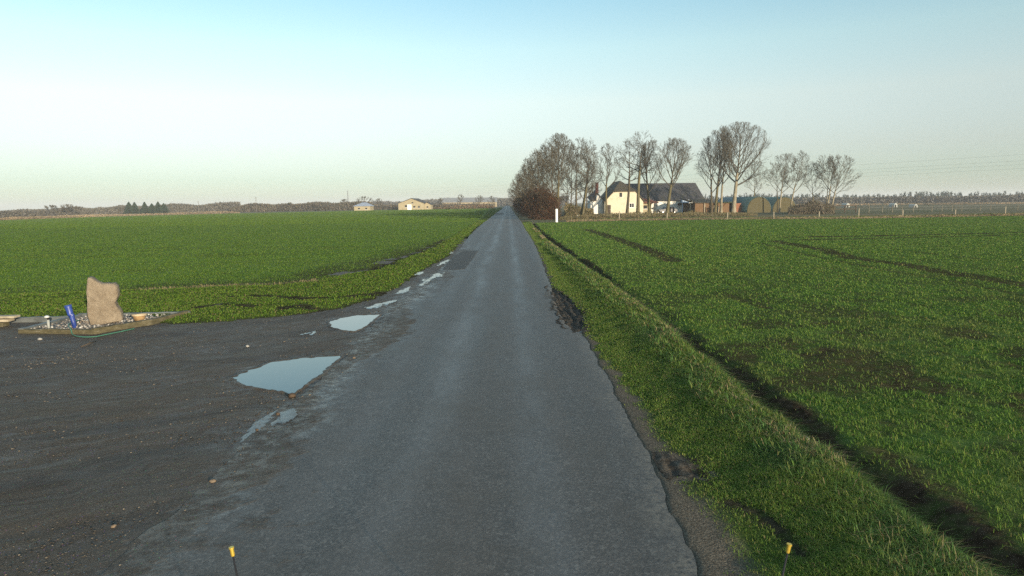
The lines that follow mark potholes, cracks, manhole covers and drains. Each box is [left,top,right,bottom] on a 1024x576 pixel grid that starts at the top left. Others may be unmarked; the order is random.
pothole [226,354,344,396]
pothole [326,314,382,333]
